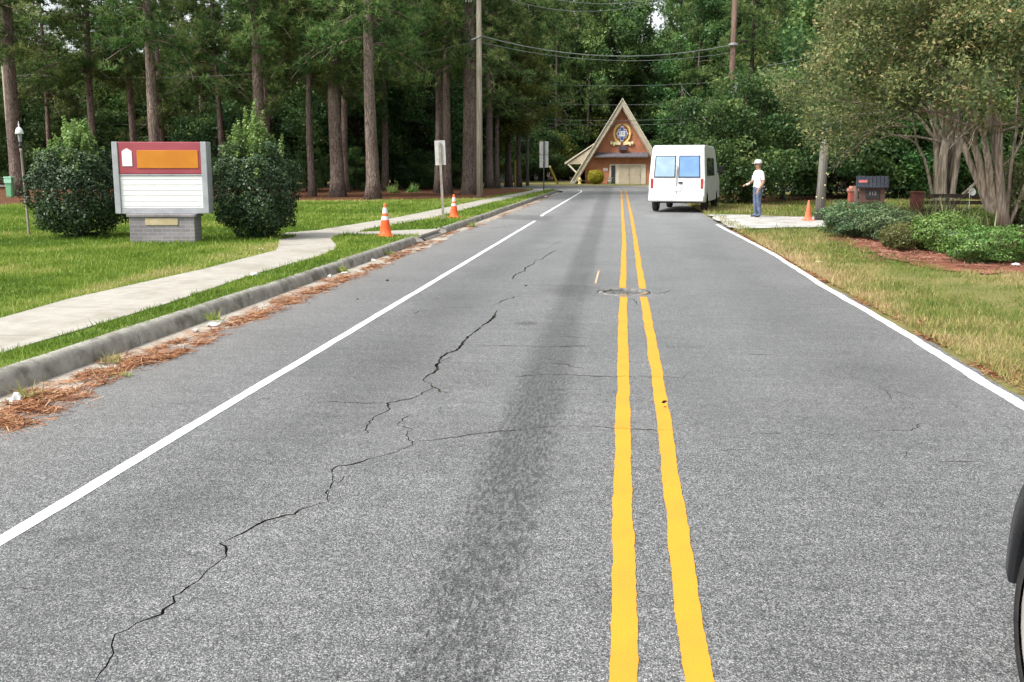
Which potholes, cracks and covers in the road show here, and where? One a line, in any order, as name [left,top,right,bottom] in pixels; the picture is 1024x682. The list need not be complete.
manhole cover [598,288,649,296]
crack [94,297,685,682]
